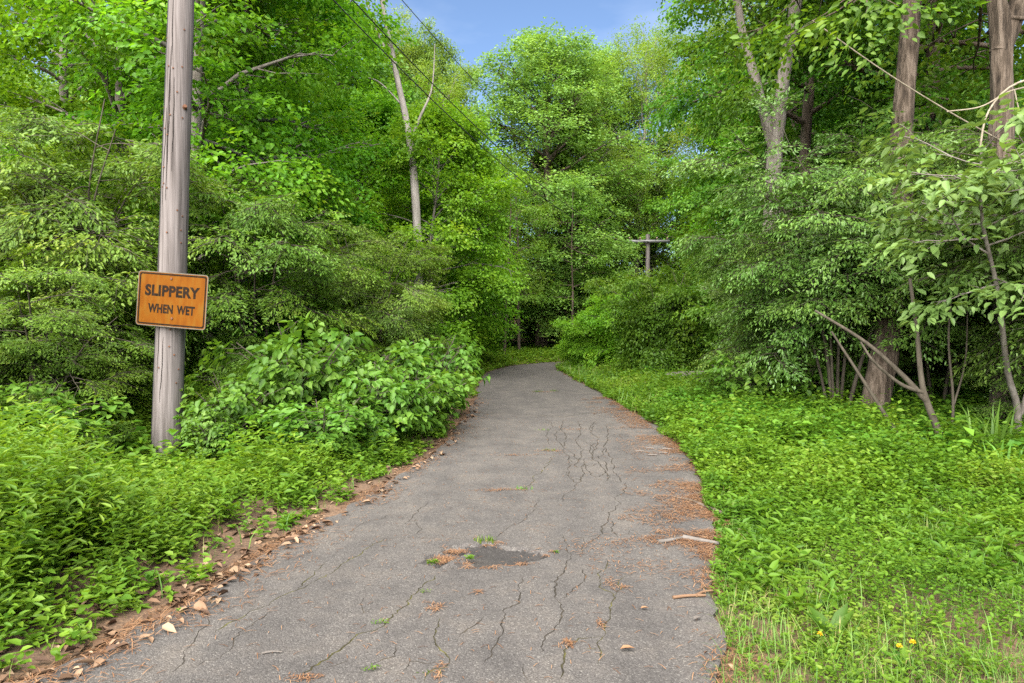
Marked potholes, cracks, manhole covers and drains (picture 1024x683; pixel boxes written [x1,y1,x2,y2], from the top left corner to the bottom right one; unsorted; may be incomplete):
pothole [416,542,553,570]
crack [170,517,386,673]
crack [302,420,627,683]
